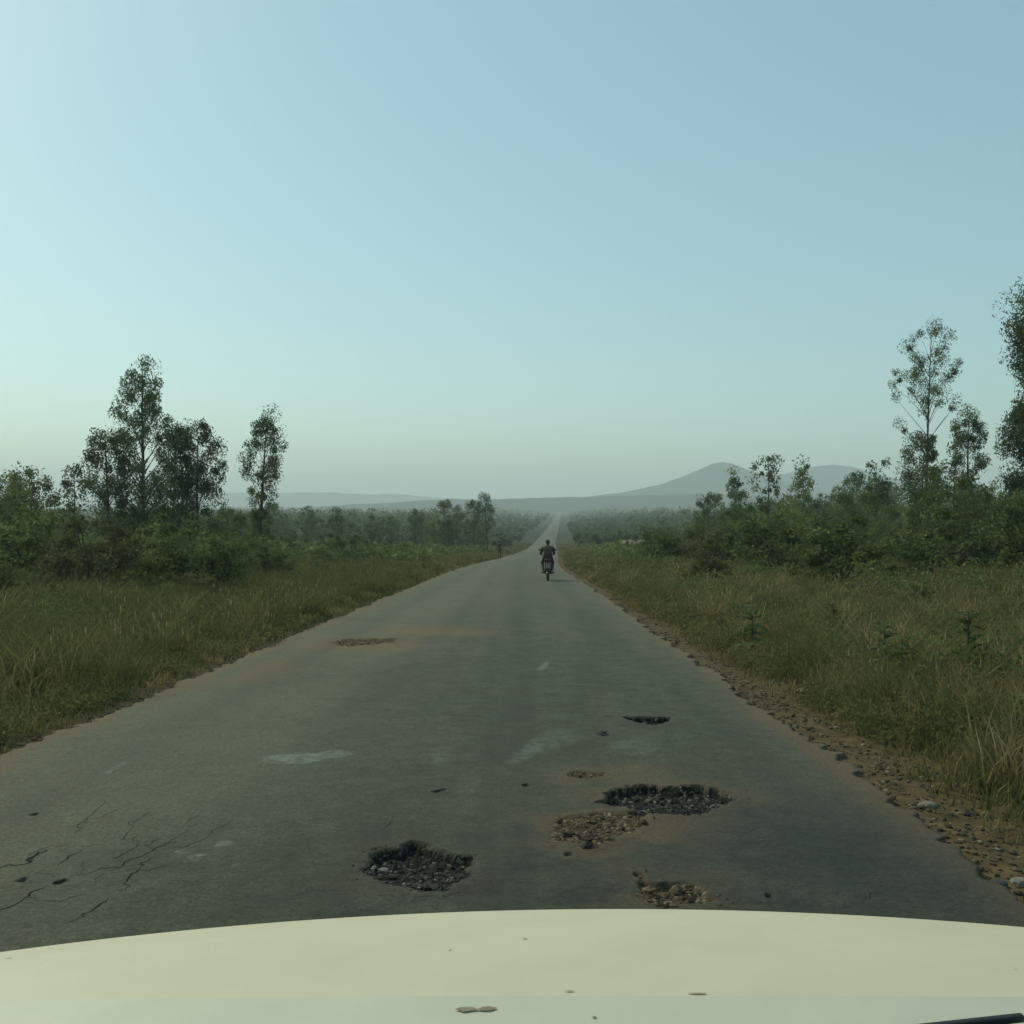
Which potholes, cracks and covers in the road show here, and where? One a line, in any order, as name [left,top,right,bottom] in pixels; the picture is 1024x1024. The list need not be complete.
pothole [609,715,682,727]
pothole [344,837,494,897]
crack [0,801,231,923]
pothole [531,781,756,855]
pothole [322,637,408,648]
pothole [617,862,739,910]
pothole [559,768,618,782]
